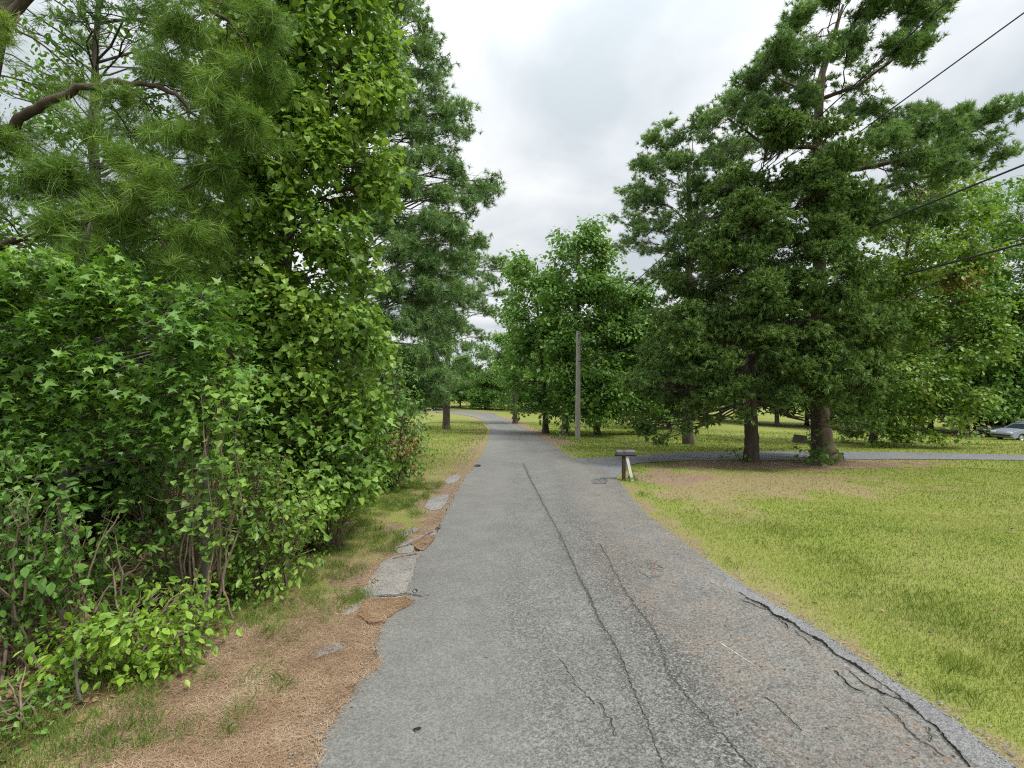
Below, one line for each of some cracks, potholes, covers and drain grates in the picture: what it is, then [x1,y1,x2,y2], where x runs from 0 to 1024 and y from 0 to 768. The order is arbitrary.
crack [560,660,618,735]
pothole [357,596,414,623]
pothole [412,535,437,551]
crack [740,592,971,767]
